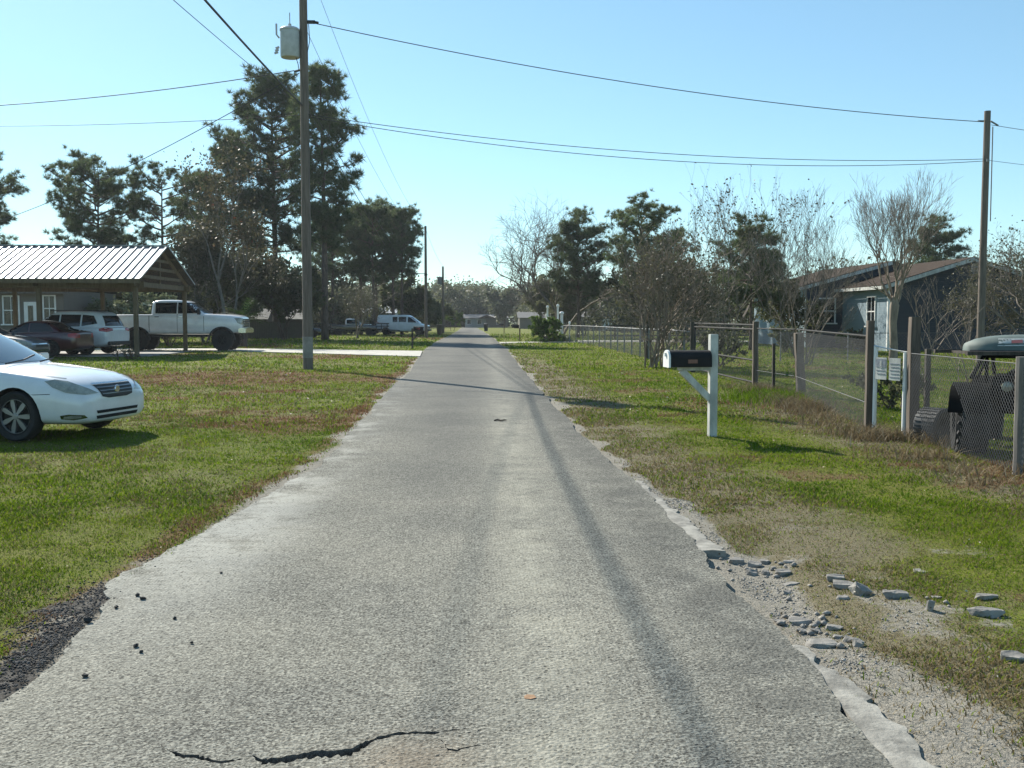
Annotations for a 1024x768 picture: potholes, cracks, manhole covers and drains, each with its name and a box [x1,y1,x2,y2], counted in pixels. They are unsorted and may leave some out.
crack [167,728,479,765]
